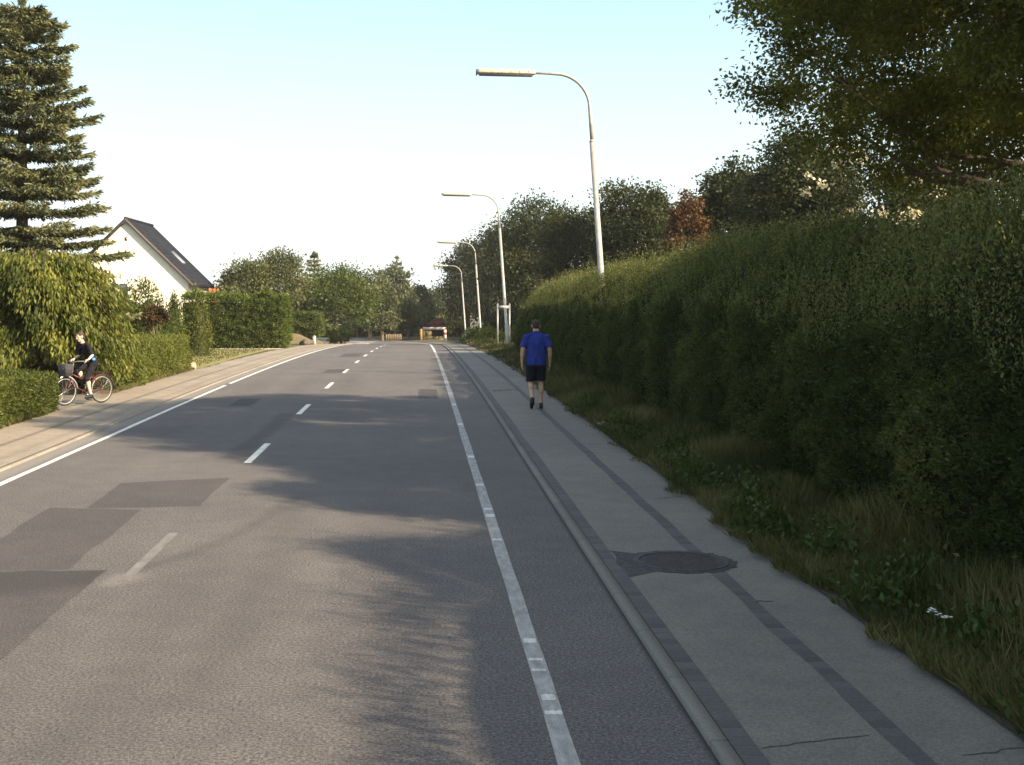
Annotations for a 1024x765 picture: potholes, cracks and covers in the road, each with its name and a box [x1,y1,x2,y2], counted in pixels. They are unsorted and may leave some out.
manhole cover [626,550,738,573]
crack [761,735,867,749]
